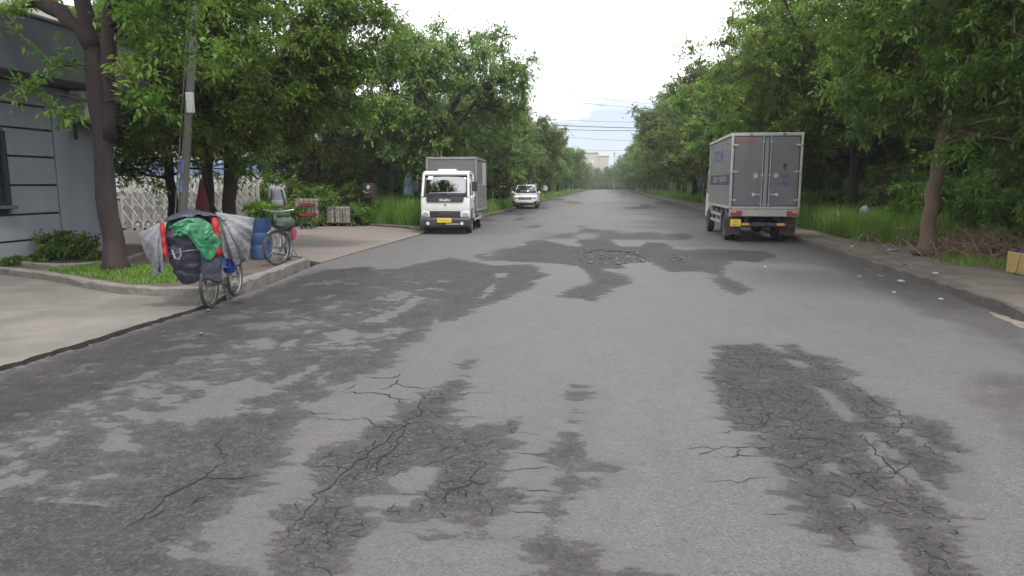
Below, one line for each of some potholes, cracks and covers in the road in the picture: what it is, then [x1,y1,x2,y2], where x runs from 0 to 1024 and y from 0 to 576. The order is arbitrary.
crack [121,435,254,532]
crack [689,416,757,457]
crack [712,343,971,576]
pothole [572,248,650,266]
crack [279,373,519,576]
